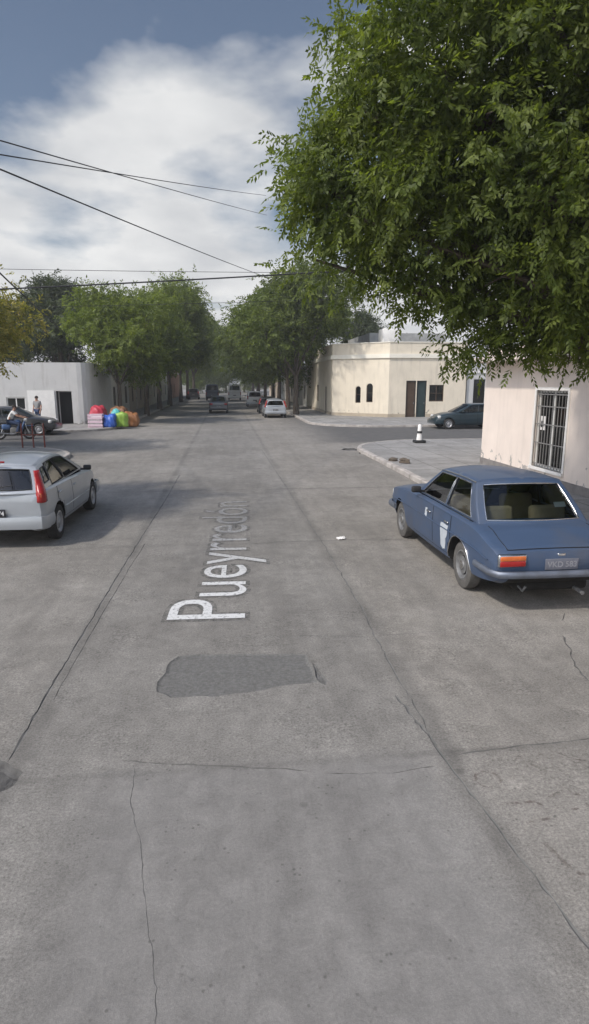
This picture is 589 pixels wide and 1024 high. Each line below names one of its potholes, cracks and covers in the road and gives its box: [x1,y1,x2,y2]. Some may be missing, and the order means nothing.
crack [246,450,589,949]
crack [8,475,306,1024]
